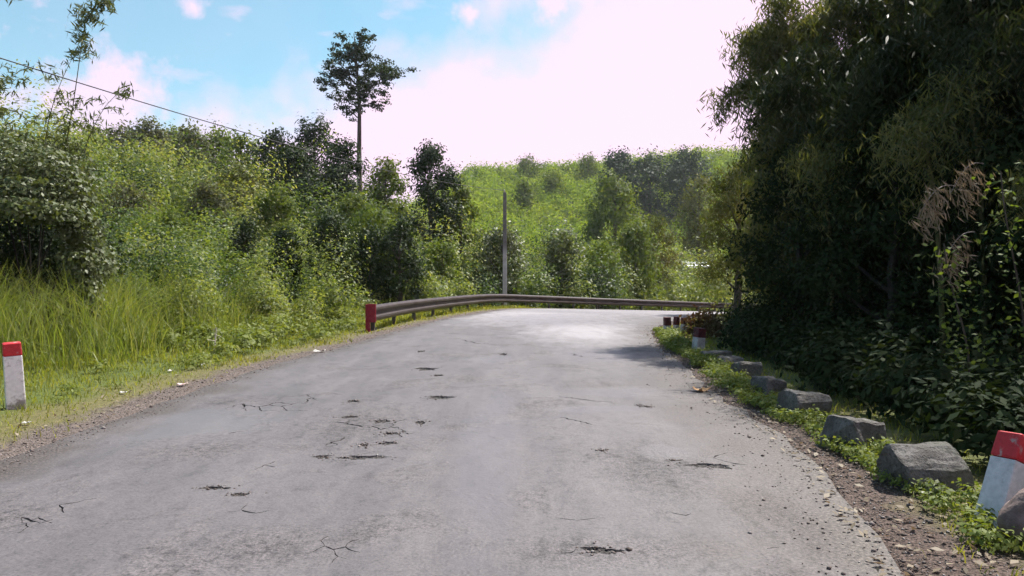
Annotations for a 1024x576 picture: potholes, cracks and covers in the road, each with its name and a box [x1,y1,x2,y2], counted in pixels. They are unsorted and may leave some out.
crack [313,536,359,562]
crack [225,394,315,411]
crack [326,419,412,445]
crack [1,498,96,533]
